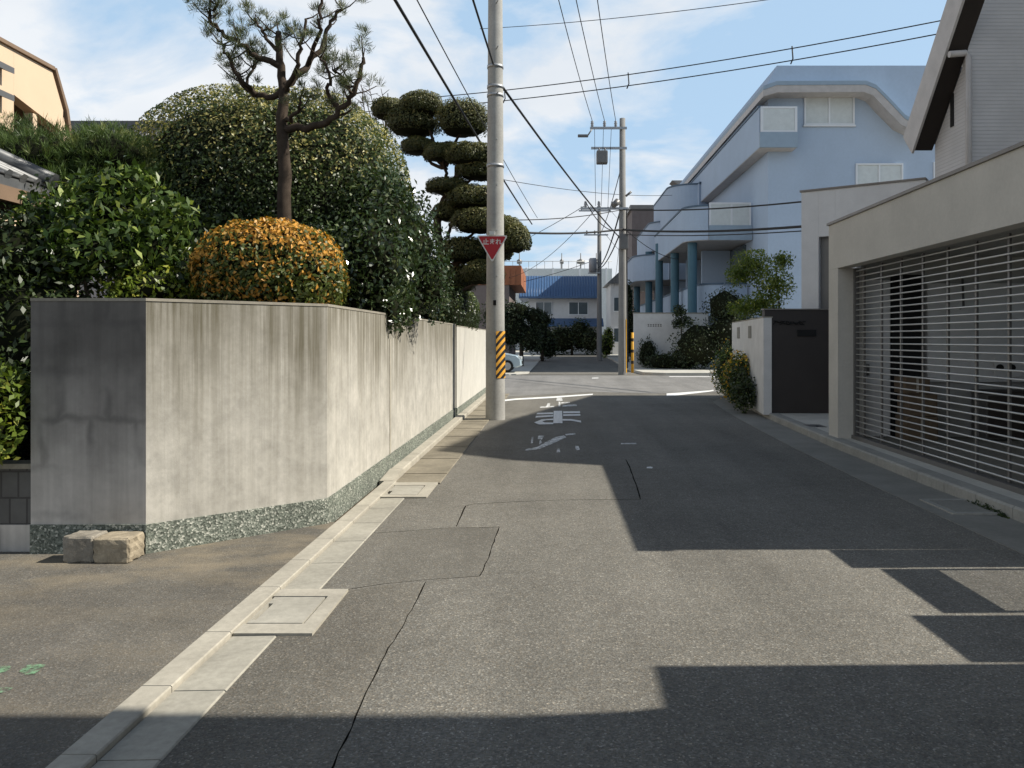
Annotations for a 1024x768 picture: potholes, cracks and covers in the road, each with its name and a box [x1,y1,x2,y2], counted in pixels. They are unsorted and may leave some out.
crack [331,583,425,768]
